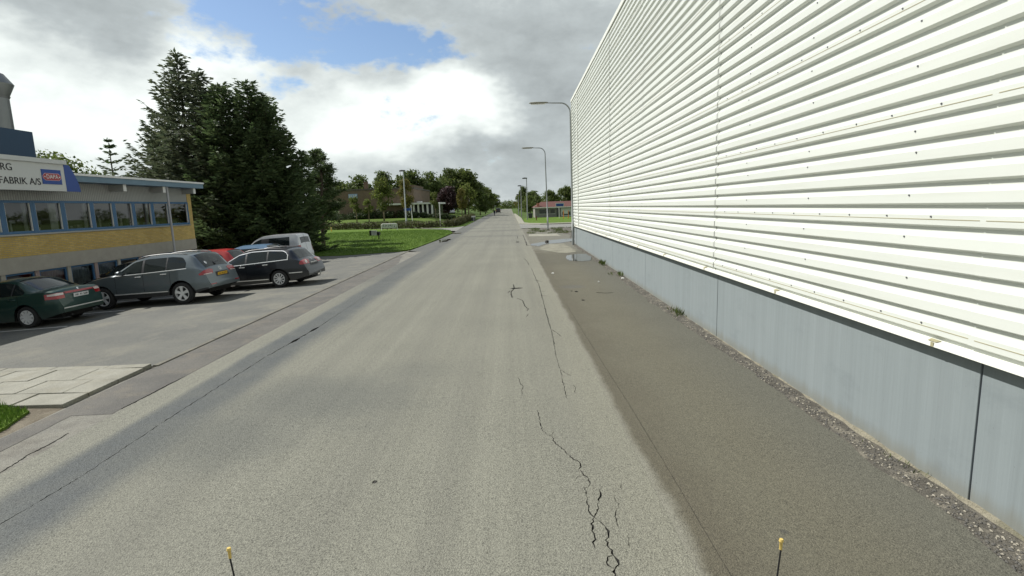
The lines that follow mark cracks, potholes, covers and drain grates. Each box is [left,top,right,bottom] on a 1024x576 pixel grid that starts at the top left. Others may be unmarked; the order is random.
crack [537,411,629,576]
crack [509,260,589,399]
